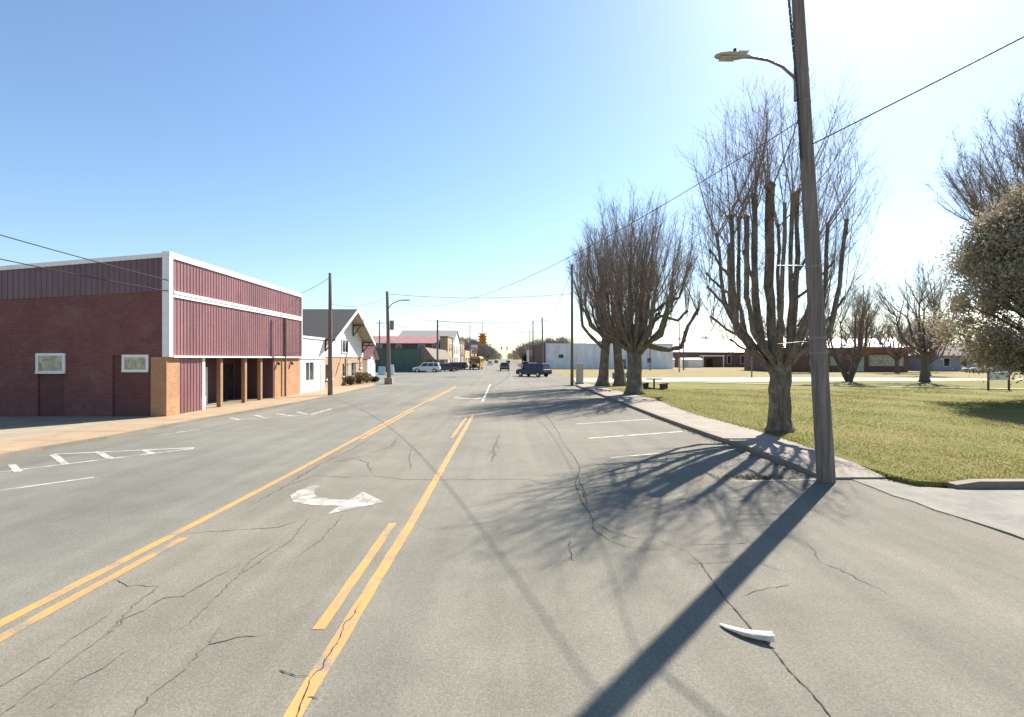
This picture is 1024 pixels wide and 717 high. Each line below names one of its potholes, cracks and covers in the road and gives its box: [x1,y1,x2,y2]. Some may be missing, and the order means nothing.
crack [565,447,676,551]
crack [280,602,361,717]
crack [0,516,341,717]
crack [661,540,831,717]
